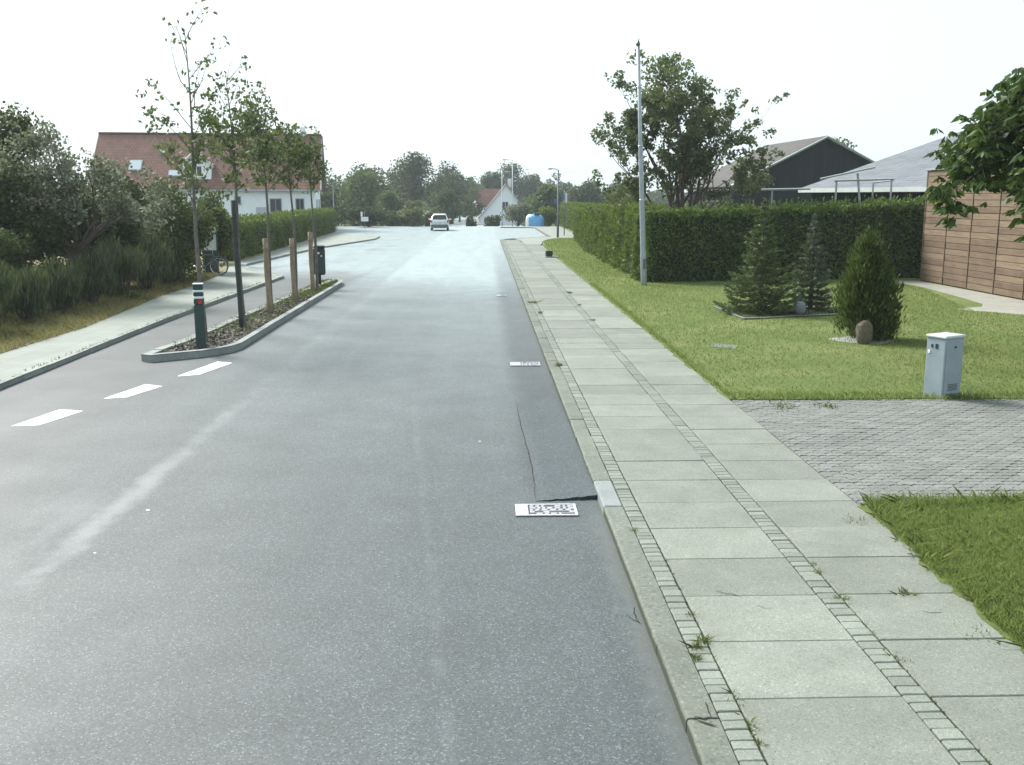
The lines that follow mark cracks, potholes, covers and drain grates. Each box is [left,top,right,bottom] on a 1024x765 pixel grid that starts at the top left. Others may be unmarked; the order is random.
crack [517,409,536,498]
crack [694,701,717,726]
